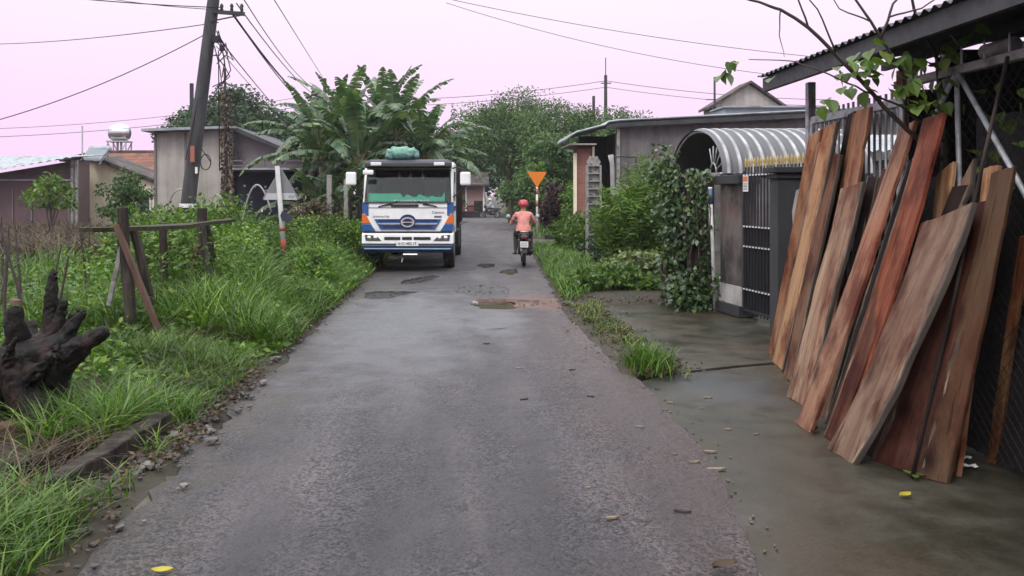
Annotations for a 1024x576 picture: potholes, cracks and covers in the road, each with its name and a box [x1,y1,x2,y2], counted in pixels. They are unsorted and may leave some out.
pothole [364,291,417,299]
pothole [401,275,440,284]
pothole [470,299,548,309]
